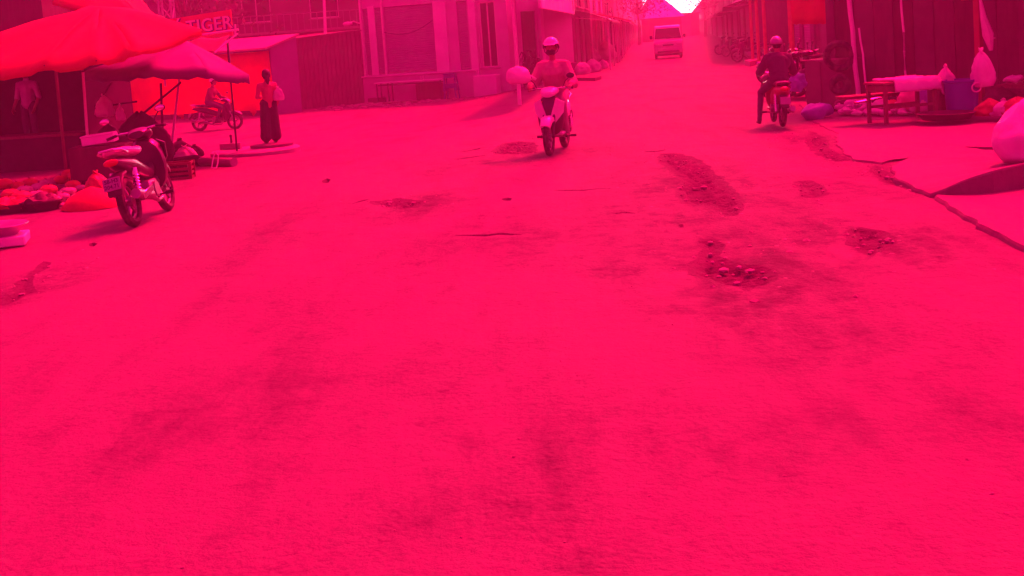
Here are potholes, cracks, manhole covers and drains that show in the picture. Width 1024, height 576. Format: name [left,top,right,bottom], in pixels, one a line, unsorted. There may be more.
pothole [367,198,427,209]
pothole [844,227,898,258]
pothole [685,239,779,292]
pothole [0,261,51,306]
pothole [657,153,746,217]
pothole [804,131,850,162]
pothole [792,180,831,198]
pothole [490,141,538,154]
